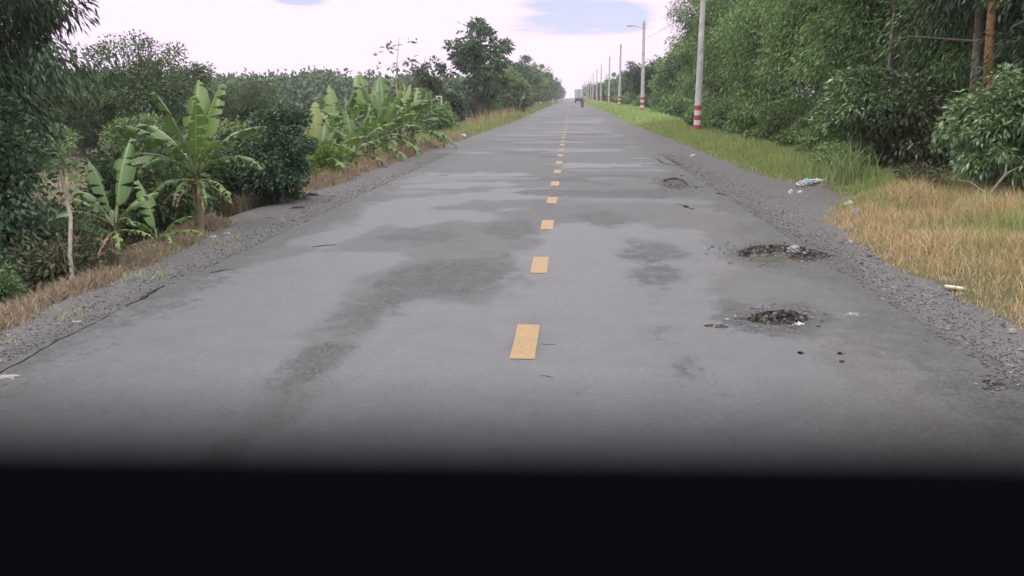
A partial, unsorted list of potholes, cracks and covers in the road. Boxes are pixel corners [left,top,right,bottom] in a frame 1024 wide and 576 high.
pothole [653,174,695,194]
crack [0,286,164,373]
pothole [973,373,1019,393]
pothole [720,303,826,328]
